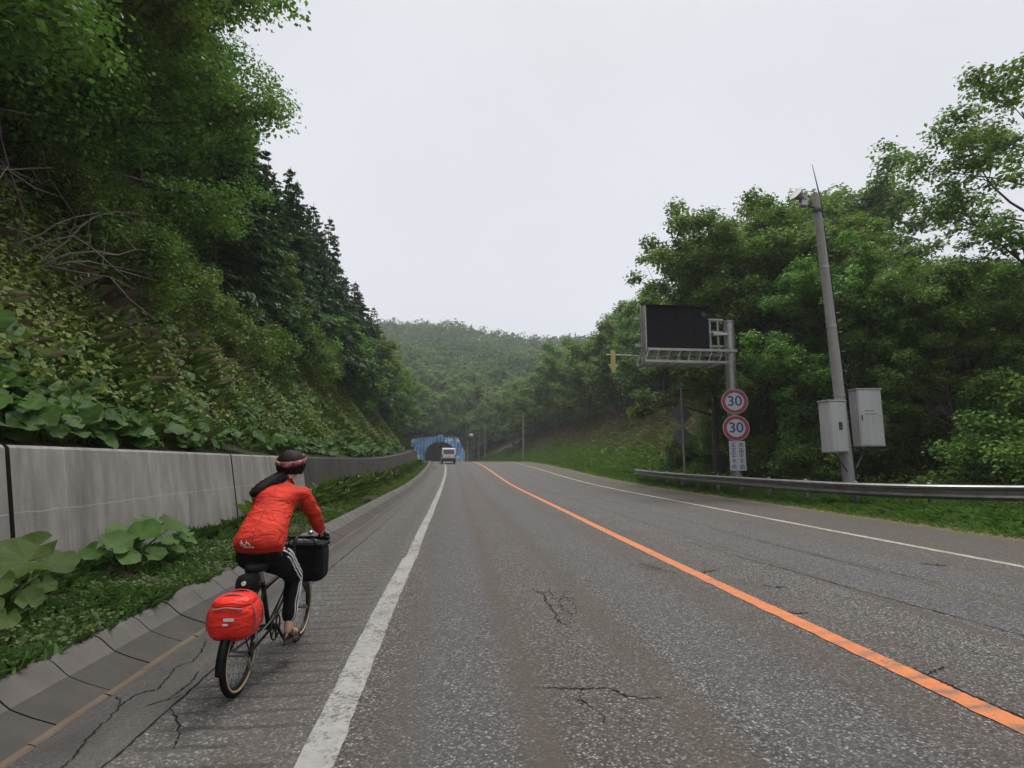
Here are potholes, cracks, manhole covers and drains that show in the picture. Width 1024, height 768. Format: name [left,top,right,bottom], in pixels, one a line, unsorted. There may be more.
crack [540,686,668,725]
crack [60,641,207,768]
